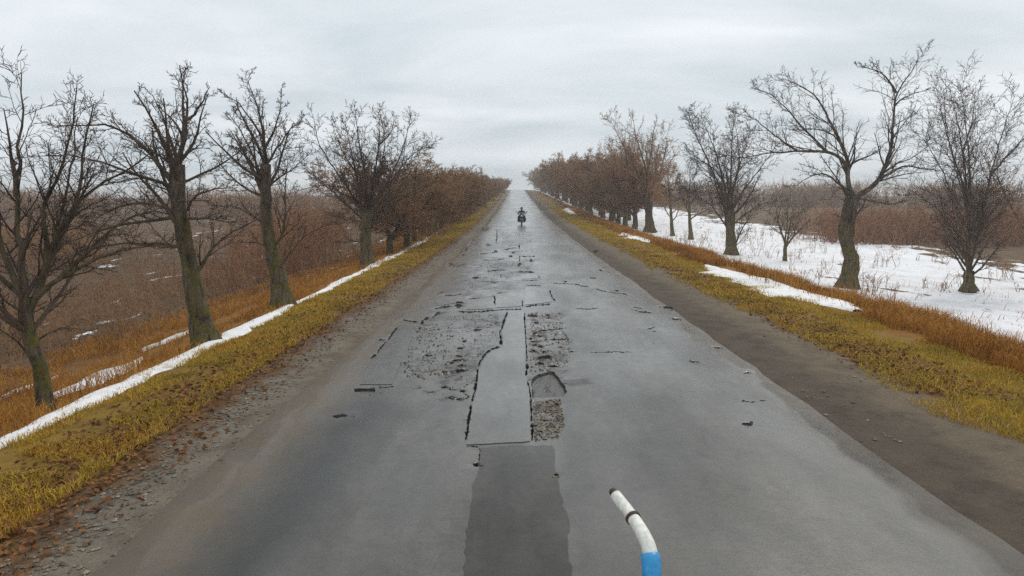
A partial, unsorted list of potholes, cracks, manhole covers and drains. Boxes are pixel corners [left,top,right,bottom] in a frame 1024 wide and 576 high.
crack [371,233,653,459]
pothole [531,371,567,398]
